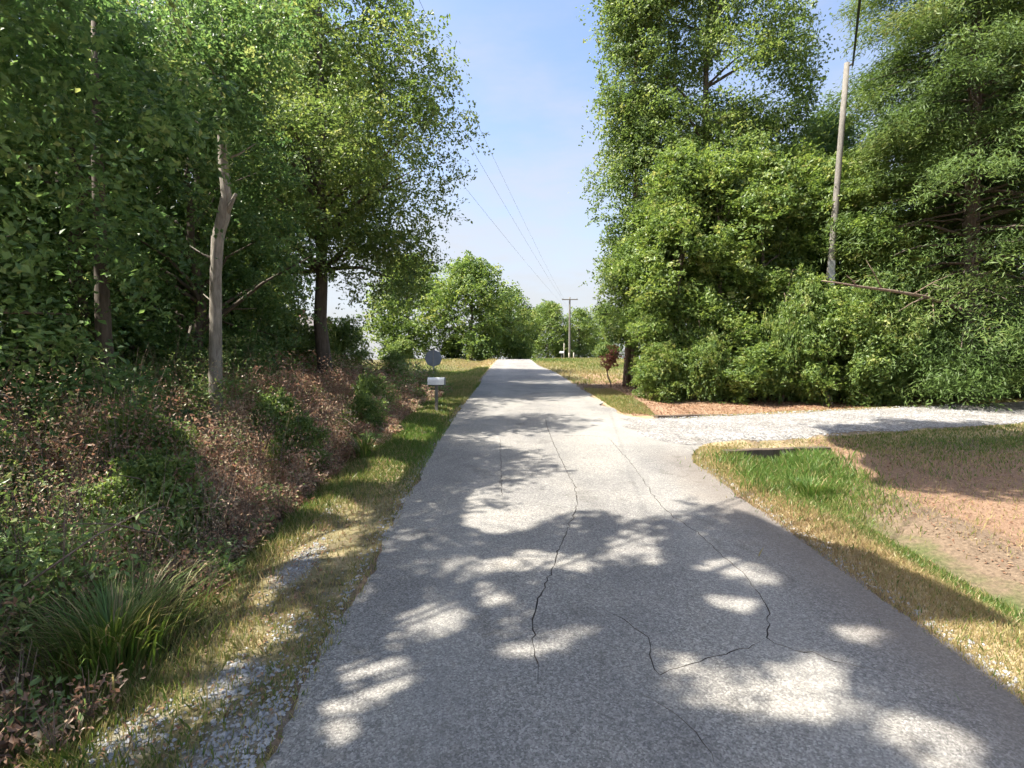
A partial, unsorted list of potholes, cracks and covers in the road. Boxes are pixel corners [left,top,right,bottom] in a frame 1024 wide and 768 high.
crack [531,431,585,670]
crack [609,439,869,680]
